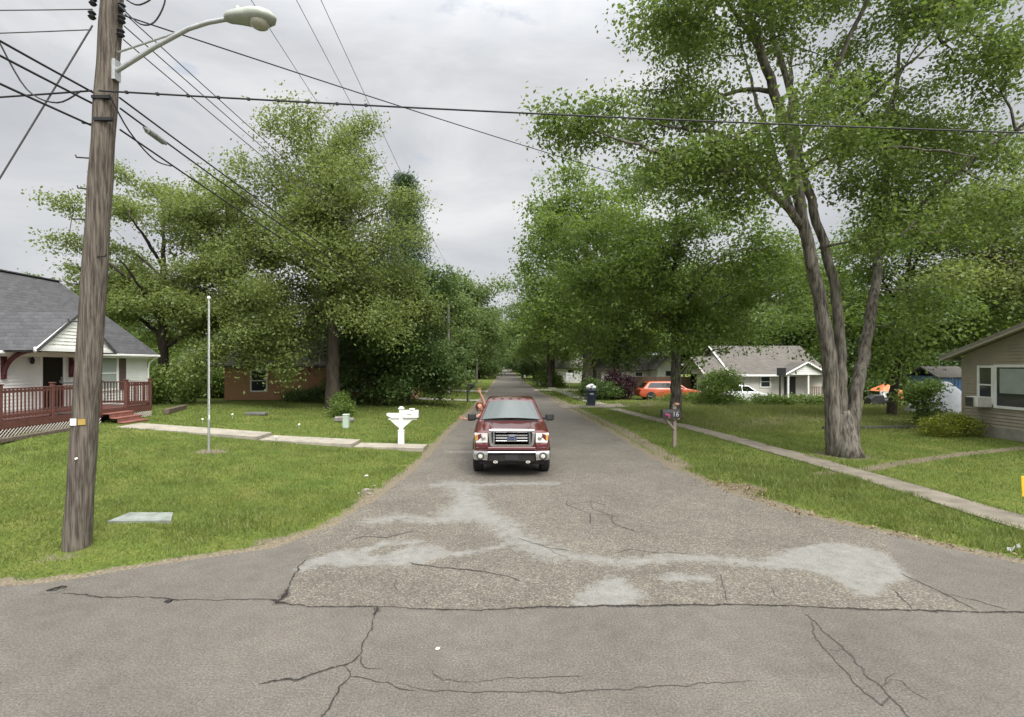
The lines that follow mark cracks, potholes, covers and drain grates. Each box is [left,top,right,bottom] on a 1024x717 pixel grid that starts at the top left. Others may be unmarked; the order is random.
crack [63,562,755,717]
crack [558,483,634,531]
crack [771,573,1006,717]
